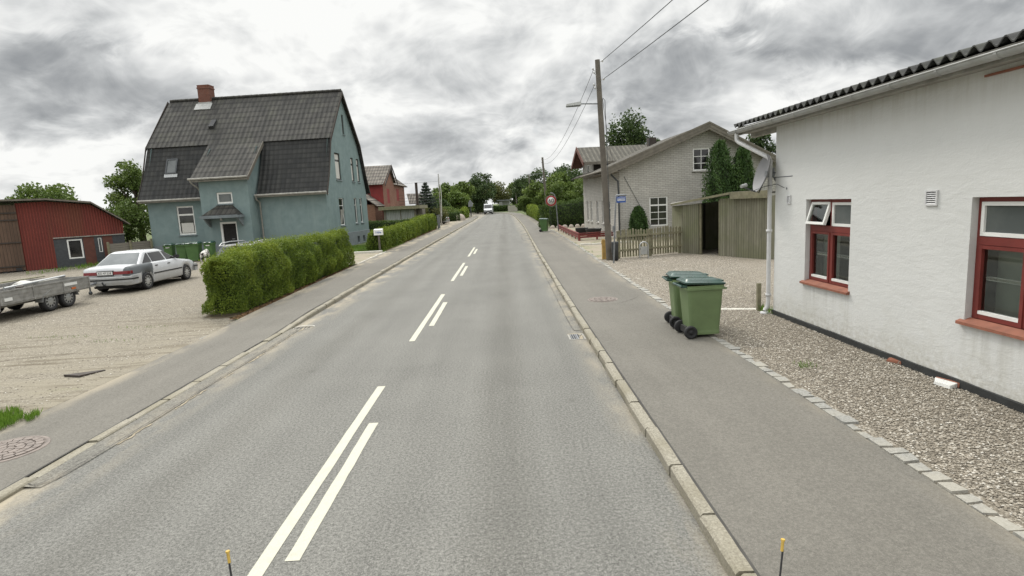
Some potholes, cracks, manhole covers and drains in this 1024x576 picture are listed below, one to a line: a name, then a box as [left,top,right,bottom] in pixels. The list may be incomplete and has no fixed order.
manhole cover [0,436,51,463]
